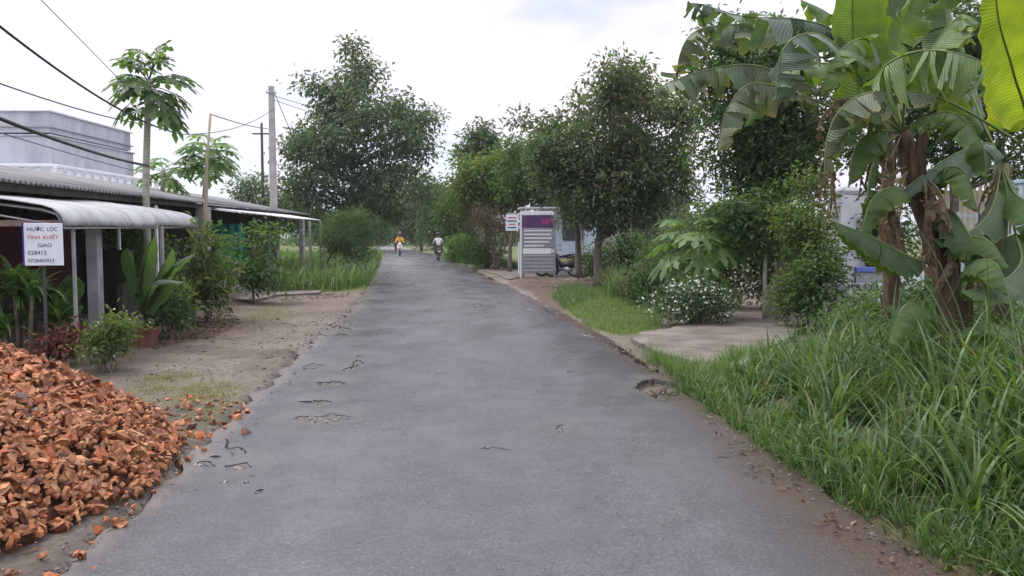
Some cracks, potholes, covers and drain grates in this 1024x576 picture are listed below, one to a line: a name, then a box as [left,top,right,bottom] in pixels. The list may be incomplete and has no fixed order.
pothole [225,462,252,471]
pothole [635,379,681,398]
crack [225,439,246,454]
pothole [293,413,353,424]
